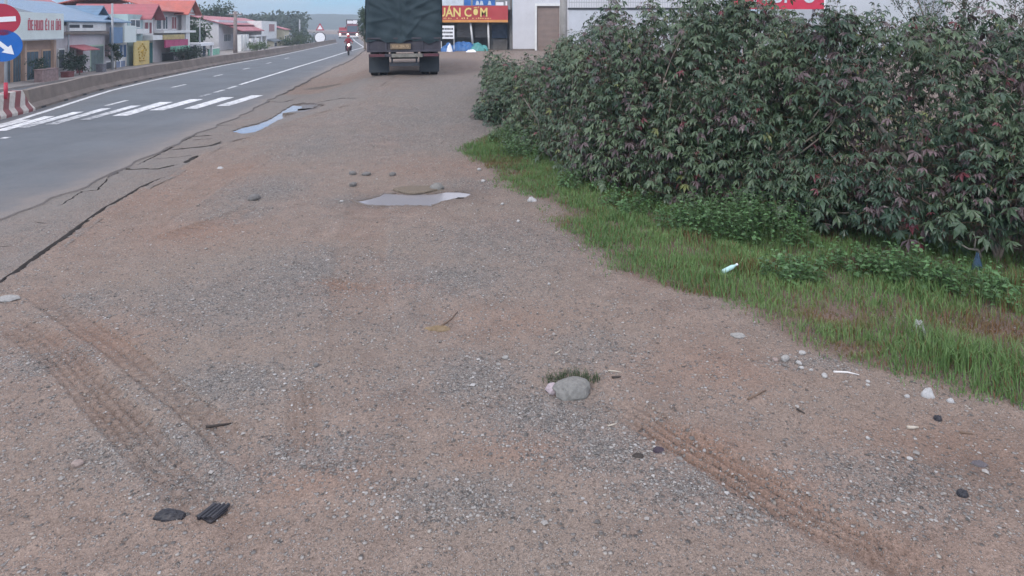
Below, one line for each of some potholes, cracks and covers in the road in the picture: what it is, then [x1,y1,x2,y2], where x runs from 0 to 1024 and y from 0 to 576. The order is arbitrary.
pothole [229,102,325,134]
crack [0,125,222,283]
pothole [352,191,471,207]
